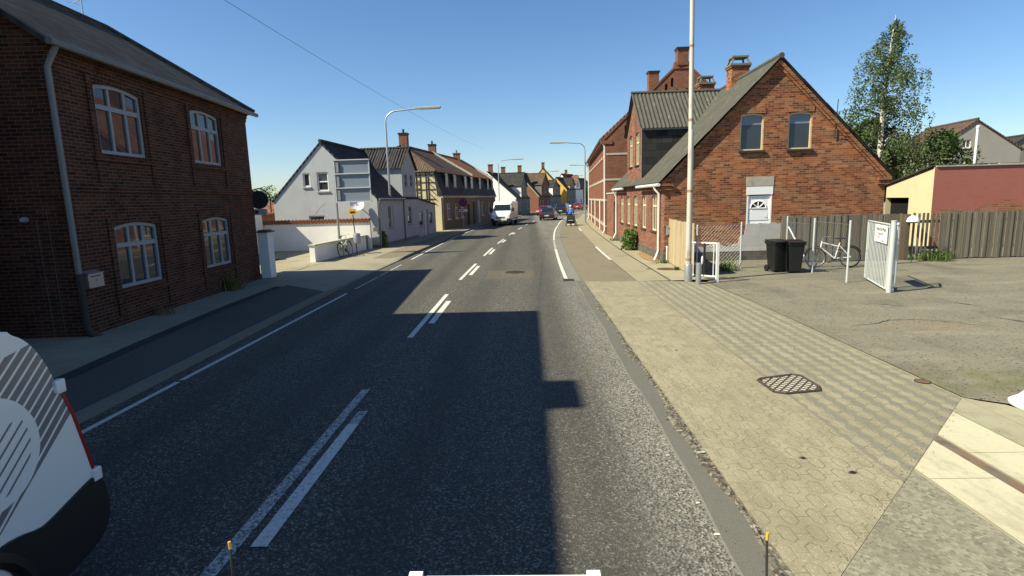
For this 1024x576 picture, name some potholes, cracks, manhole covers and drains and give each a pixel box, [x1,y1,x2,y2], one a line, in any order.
crack [854,302,1024,335]
